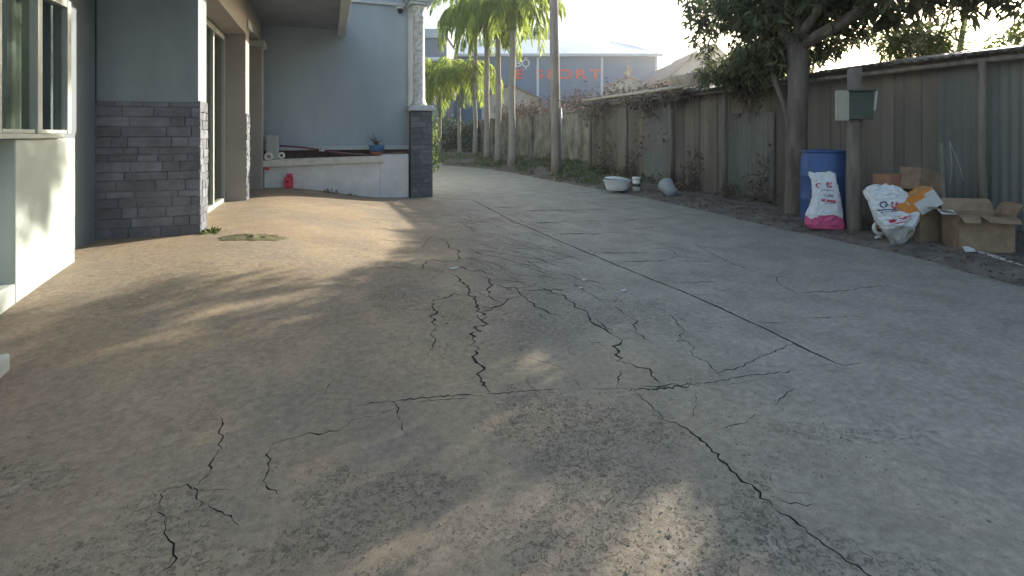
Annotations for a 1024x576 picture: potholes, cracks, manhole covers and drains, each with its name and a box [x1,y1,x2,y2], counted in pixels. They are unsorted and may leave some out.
crack [157,417,238,576]
crack [262,402,407,495]
crack [378,207,793,392]
